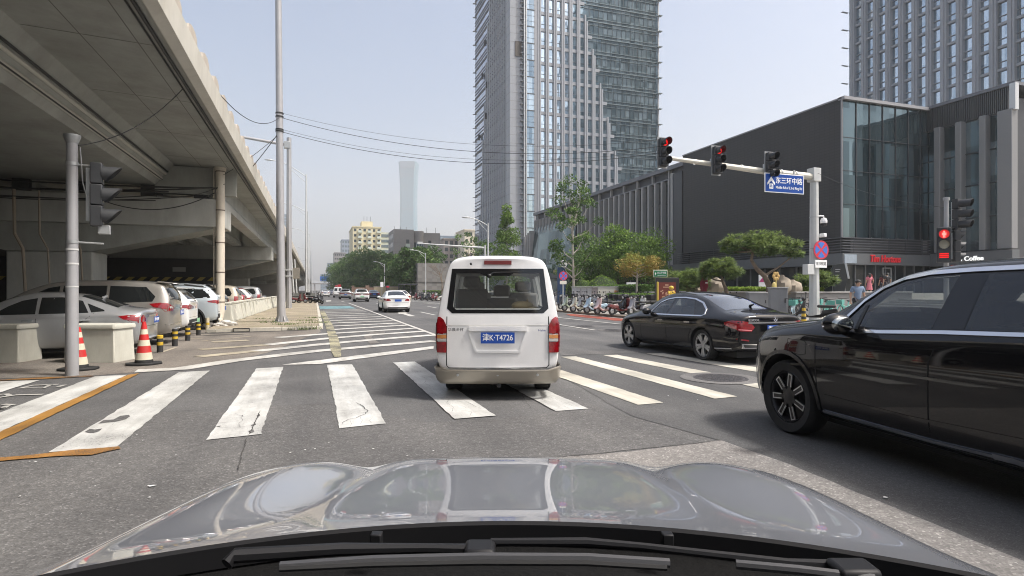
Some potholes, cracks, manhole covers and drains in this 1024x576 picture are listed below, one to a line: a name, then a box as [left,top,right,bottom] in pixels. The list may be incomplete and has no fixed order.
crack [222,412,260,470]
manhole cover [680,372,757,384]
